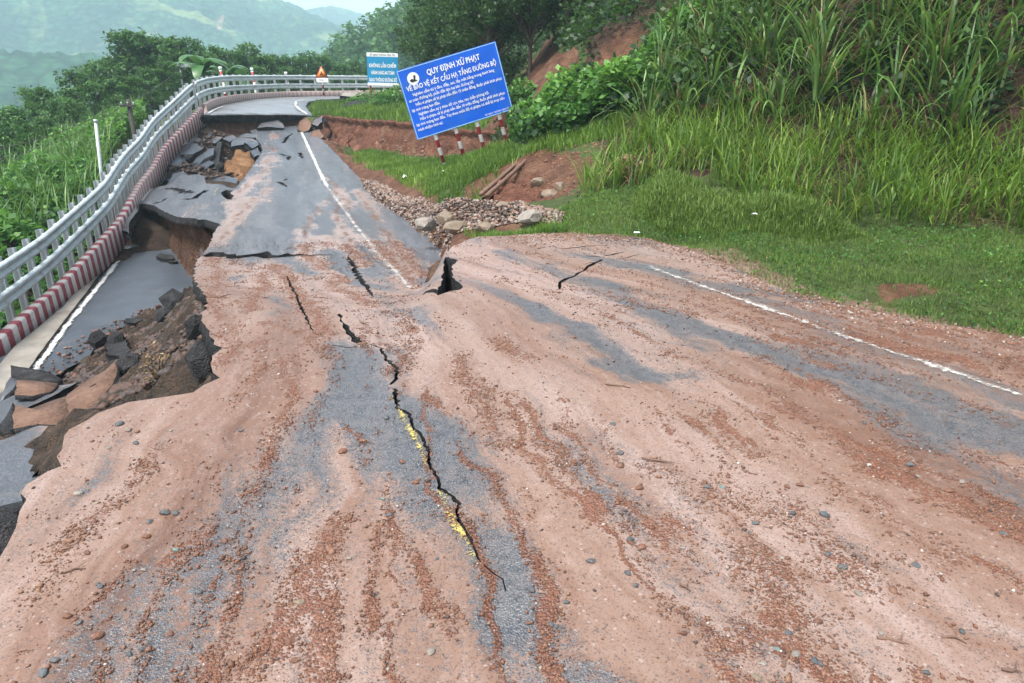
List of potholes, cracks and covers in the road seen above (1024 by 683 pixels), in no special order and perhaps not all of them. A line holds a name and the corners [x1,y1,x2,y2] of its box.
crack [538,245,636,289]
crack [287,277,314,331]
crack [334,344,506,592]
crack [347,257,374,297]
crack [268,133,304,160]
